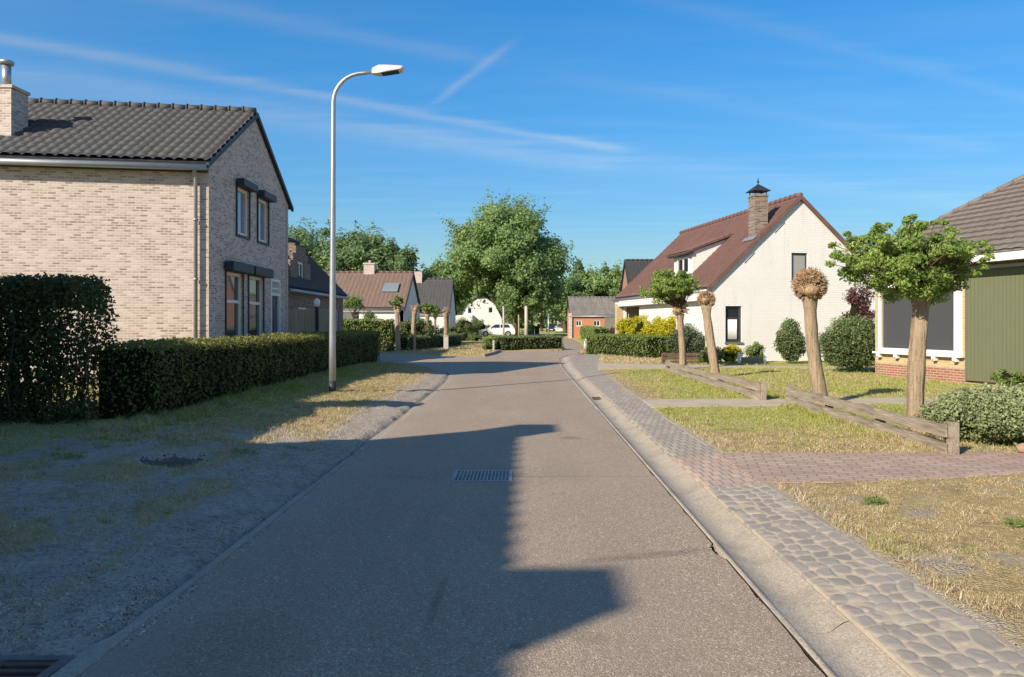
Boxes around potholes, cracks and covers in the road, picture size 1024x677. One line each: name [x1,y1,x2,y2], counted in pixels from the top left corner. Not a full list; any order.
pothole [140,453,209,468]
drain grate [0,655,75,677]
